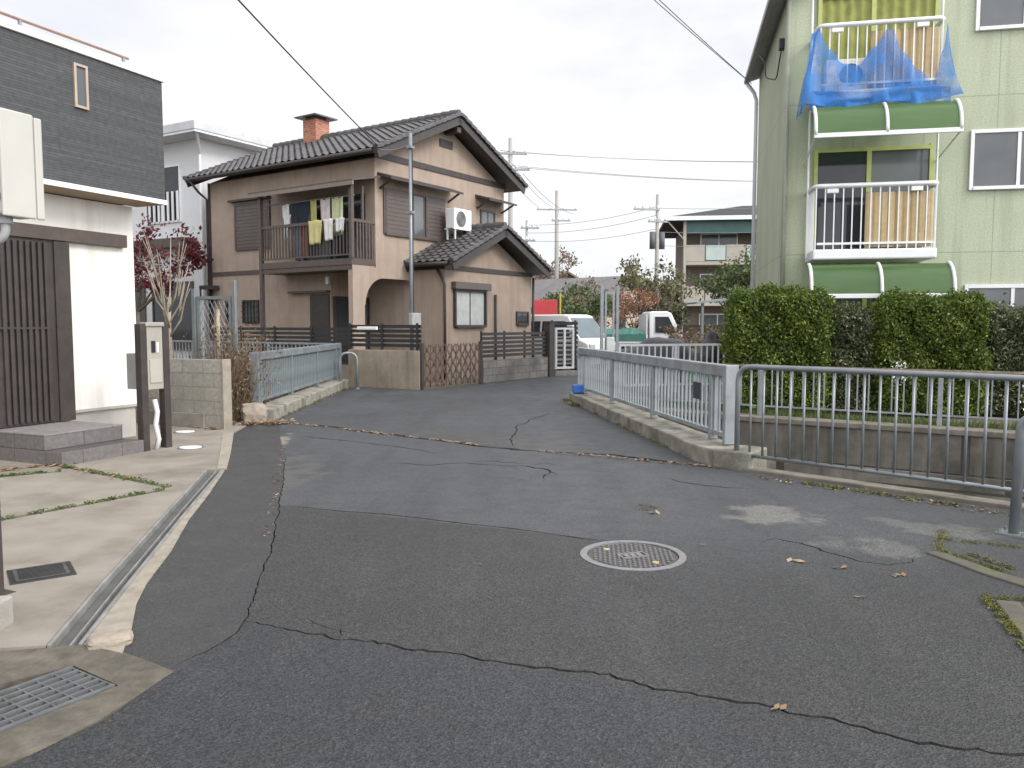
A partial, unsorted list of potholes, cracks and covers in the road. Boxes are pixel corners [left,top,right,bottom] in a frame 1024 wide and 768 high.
manhole cover [580,540,687,571]
crack [244,619,1024,756]
crack [304,414,568,481]
drain grate [0,645,174,768]
crack [761,539,914,566]
